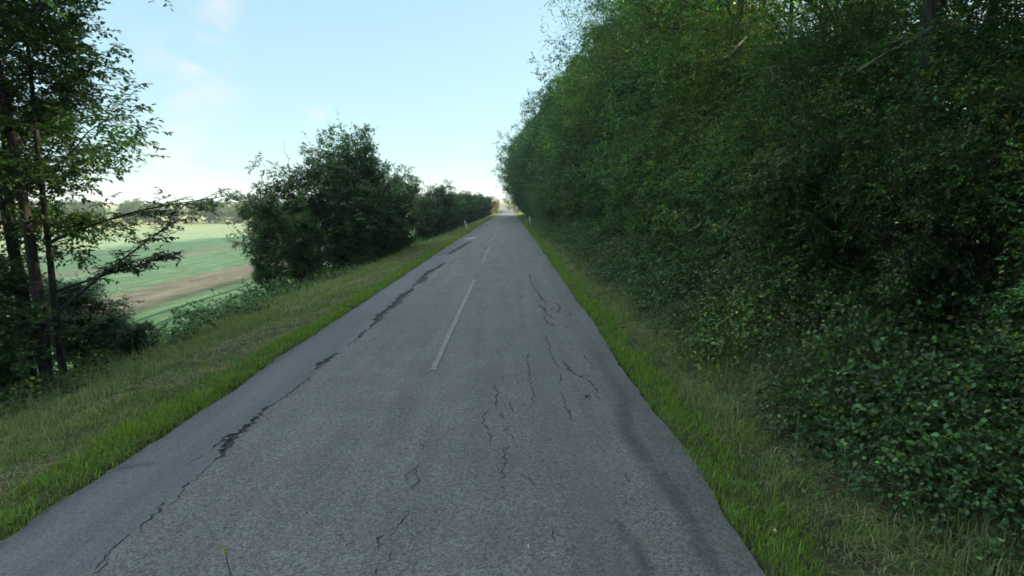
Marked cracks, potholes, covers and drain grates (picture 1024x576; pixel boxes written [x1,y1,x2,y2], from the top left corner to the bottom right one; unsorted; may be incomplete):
crack [482,261,603,490]
crack [95,501,165,573]
crack [392,439,425,490]
crack [375,508,411,575]
